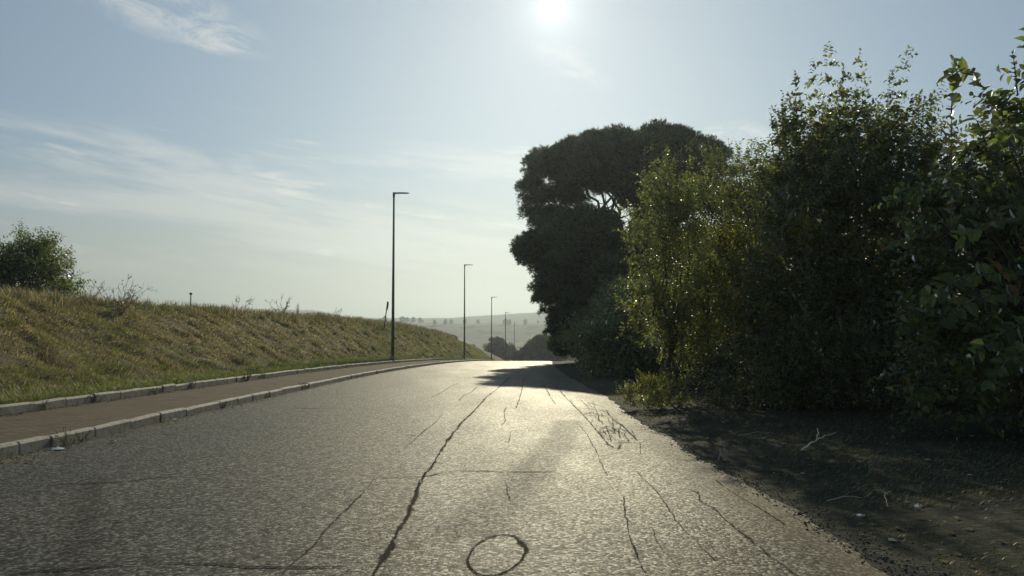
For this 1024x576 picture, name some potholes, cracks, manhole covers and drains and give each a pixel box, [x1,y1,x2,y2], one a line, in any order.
crack [623,473,797,575]
crack [543,385,644,474]
crack [15,378,557,576]
